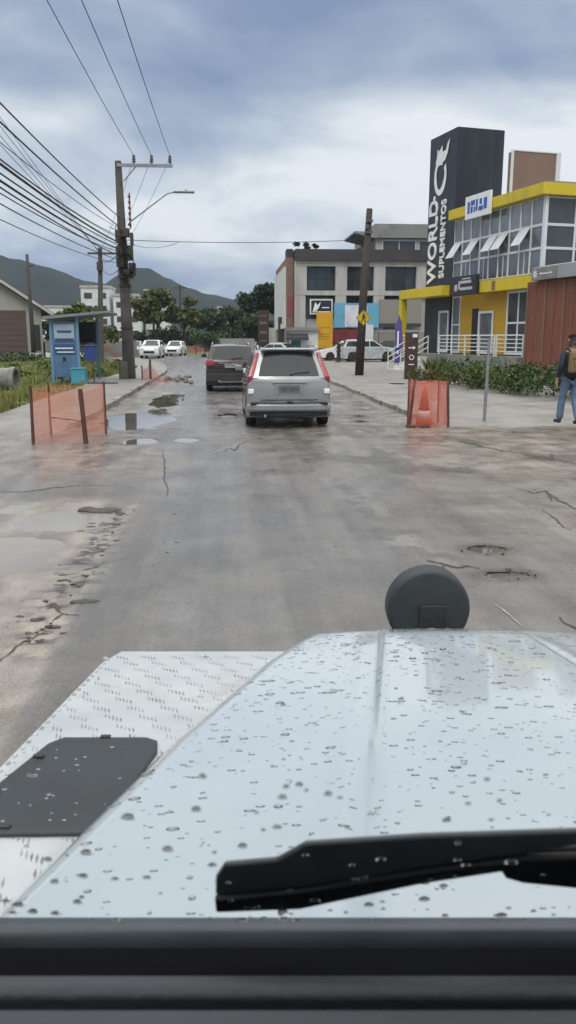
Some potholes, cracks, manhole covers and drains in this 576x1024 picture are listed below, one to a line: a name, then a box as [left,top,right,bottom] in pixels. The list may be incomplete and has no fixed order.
crack [428,560,477,569]
pothole [472,568,538,581]
crack [0,604,80,660]
crack [526,490,576,530]
pothole [461,544,515,555]
